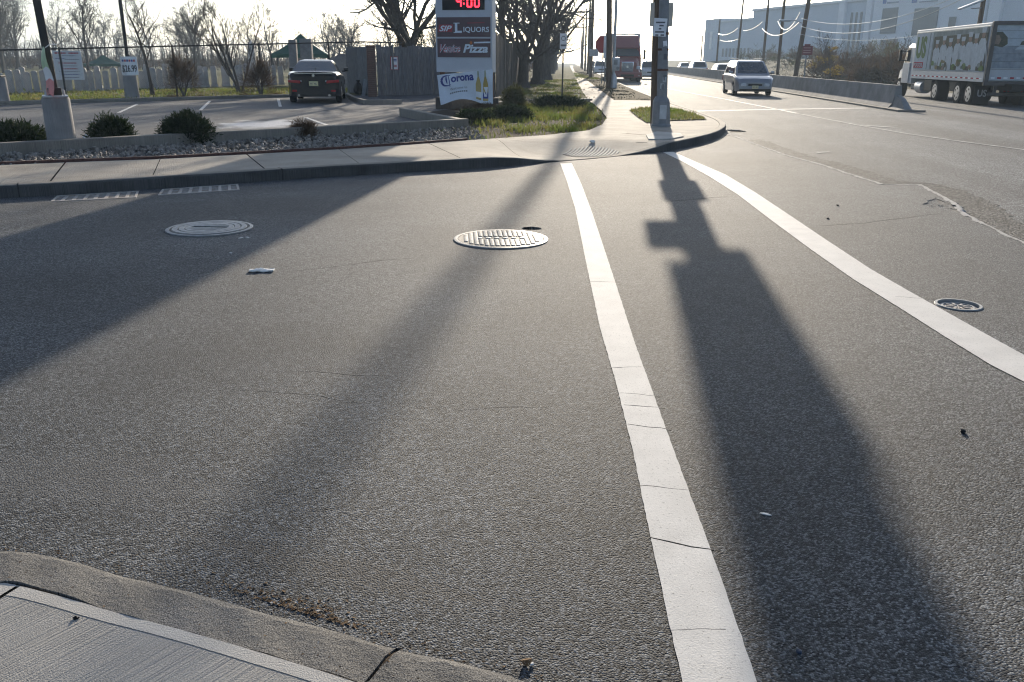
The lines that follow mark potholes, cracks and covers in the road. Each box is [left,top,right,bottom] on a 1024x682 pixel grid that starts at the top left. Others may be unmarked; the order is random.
drain grate [50,191,139,202]
utility cover [934,298,983,311]
manhole cover [165,220,253,237]
manhole cover [454,229,548,249]
drain grate [158,184,240,195]
